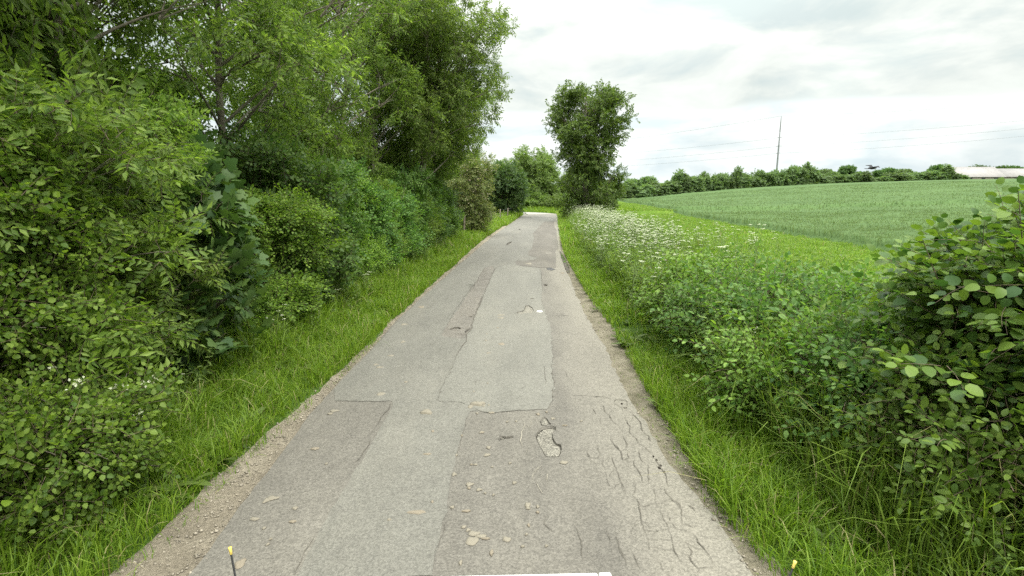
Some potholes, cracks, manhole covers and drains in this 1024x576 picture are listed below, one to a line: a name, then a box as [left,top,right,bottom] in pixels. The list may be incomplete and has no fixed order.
pothole [536,425,562,457]
crack [567,375,713,571]
